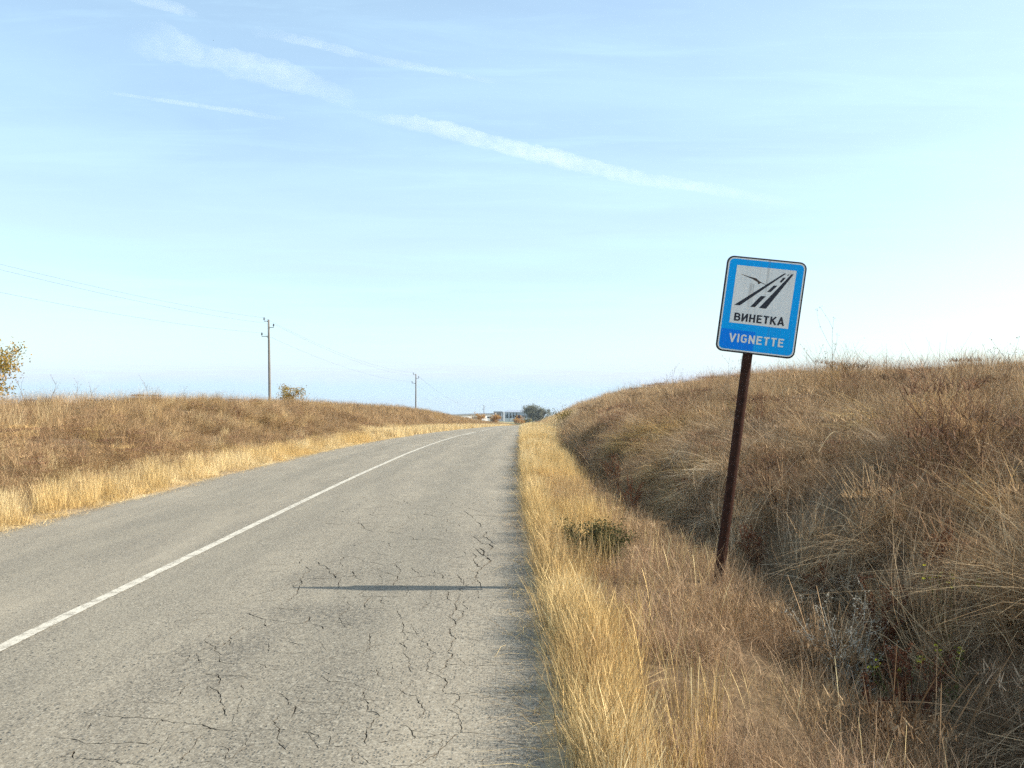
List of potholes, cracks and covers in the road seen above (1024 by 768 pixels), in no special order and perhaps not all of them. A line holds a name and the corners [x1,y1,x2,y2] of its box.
crack [55,496,509,768]
